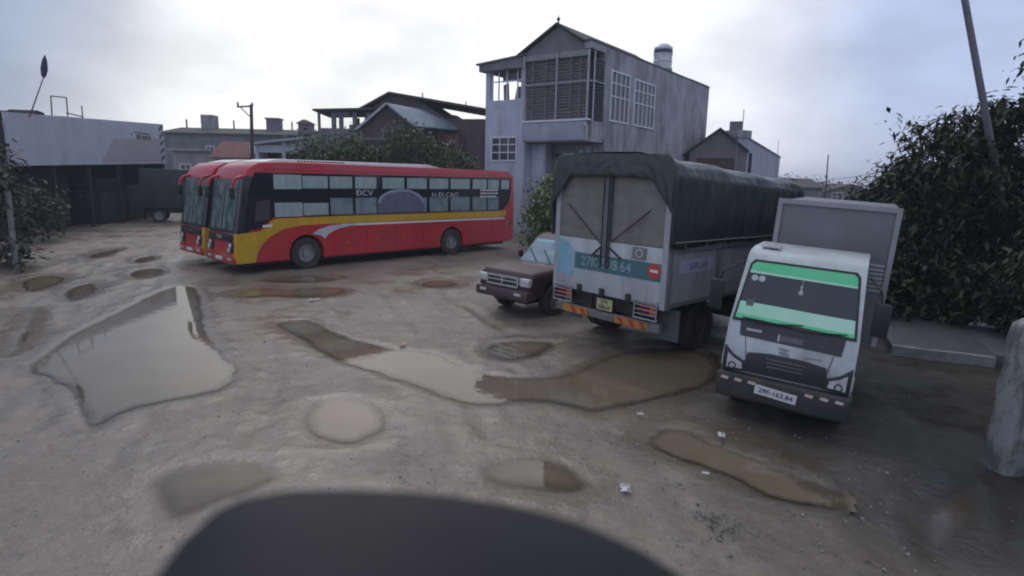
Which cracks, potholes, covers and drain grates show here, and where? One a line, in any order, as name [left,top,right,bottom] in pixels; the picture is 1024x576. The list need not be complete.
pothole [11,274,74,292]
pothole [117,448,315,536]
pothole [227,285,355,298]
pothole [289,391,396,450]
pothole [127,255,162,263]
pothole [462,446,614,505]
pothole [267,318,722,414]
pothole [415,278,468,288]
pothole [626,420,857,516]
pothole [11,284,252,432]
pothole [121,267,171,279]
pothole [81,248,125,258]
